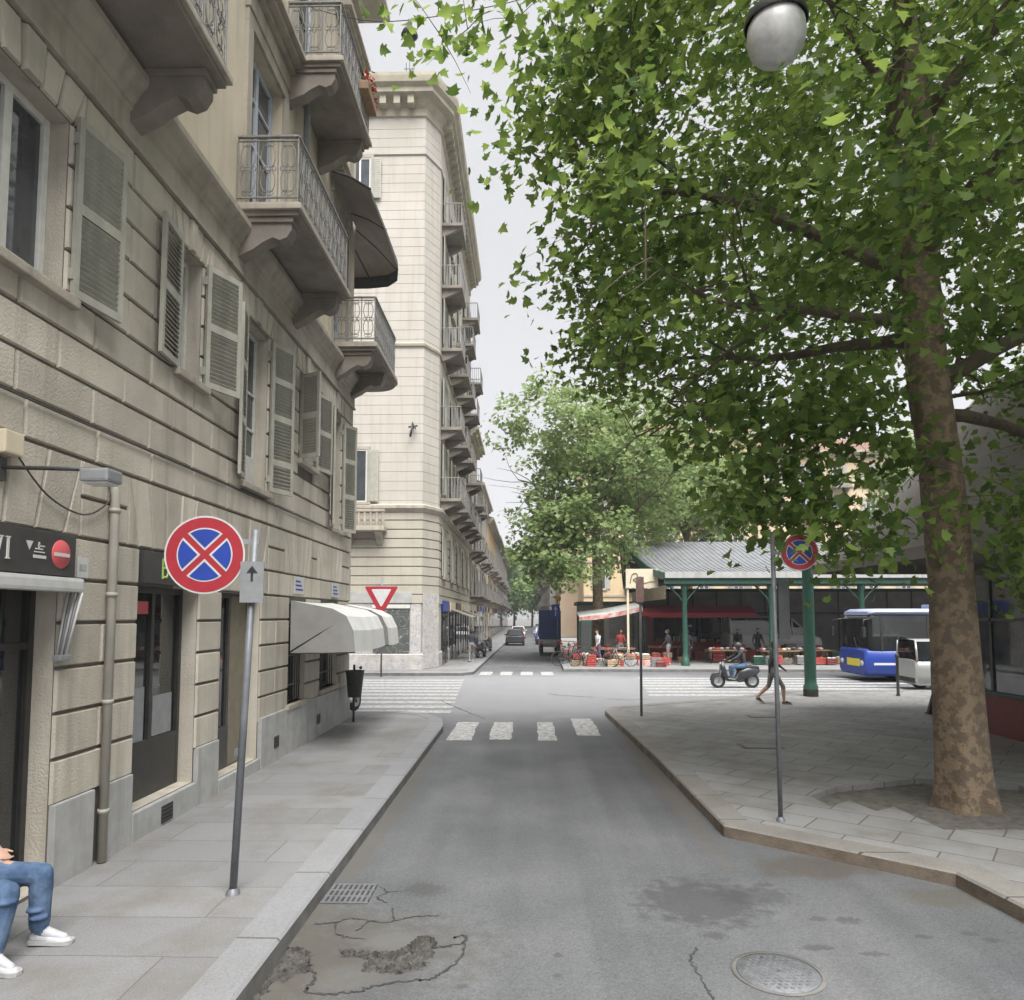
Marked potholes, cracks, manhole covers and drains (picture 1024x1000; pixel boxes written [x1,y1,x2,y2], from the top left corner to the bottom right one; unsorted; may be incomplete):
pothole [337,935,439,975]
crack [303,934,468,995]
manhole cover [731,951,828,996]
crack [689,946,715,1000]
drain grate [320,883,378,904]
crack [314,886,439,939]
pothole [252,946,316,1000]
